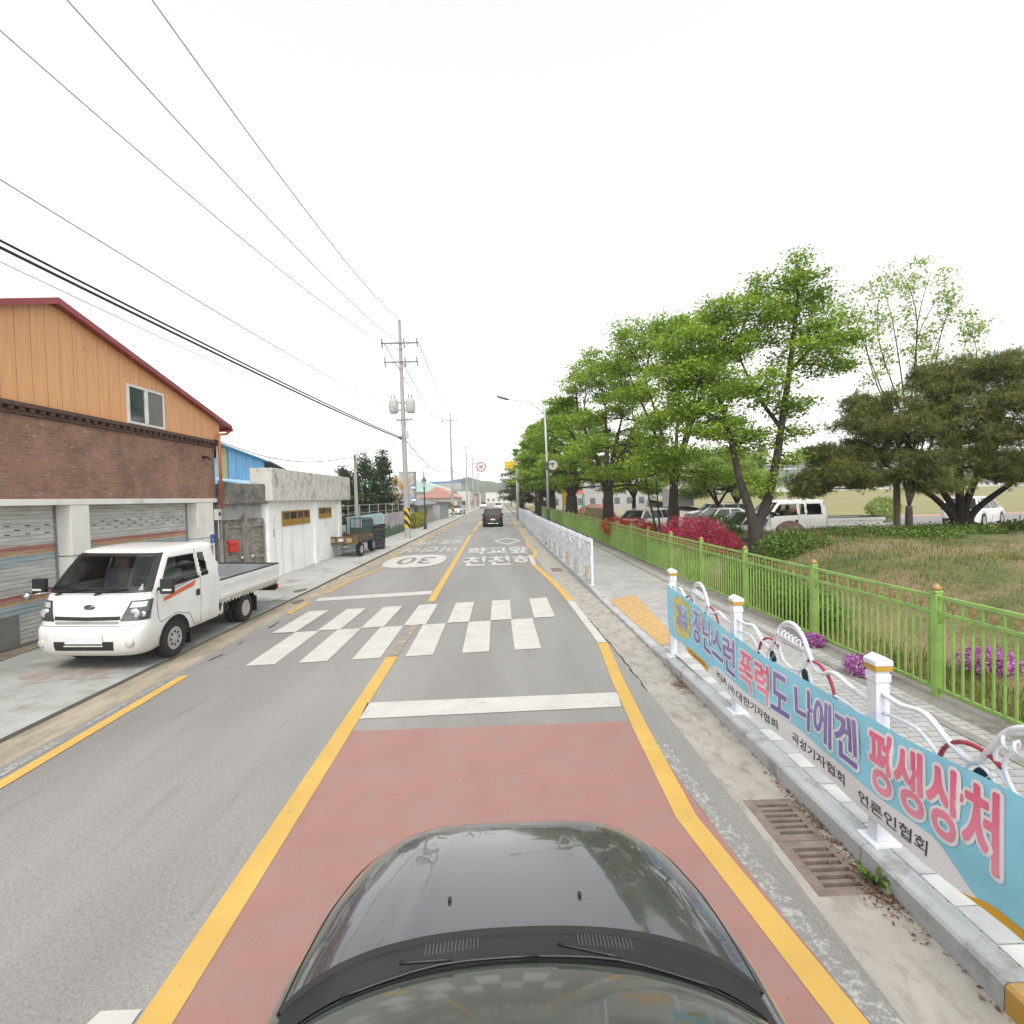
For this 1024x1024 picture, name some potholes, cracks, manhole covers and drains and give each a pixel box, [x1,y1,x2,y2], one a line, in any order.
crack [572,600,647,690]
drain grate [743,798,880,897]
